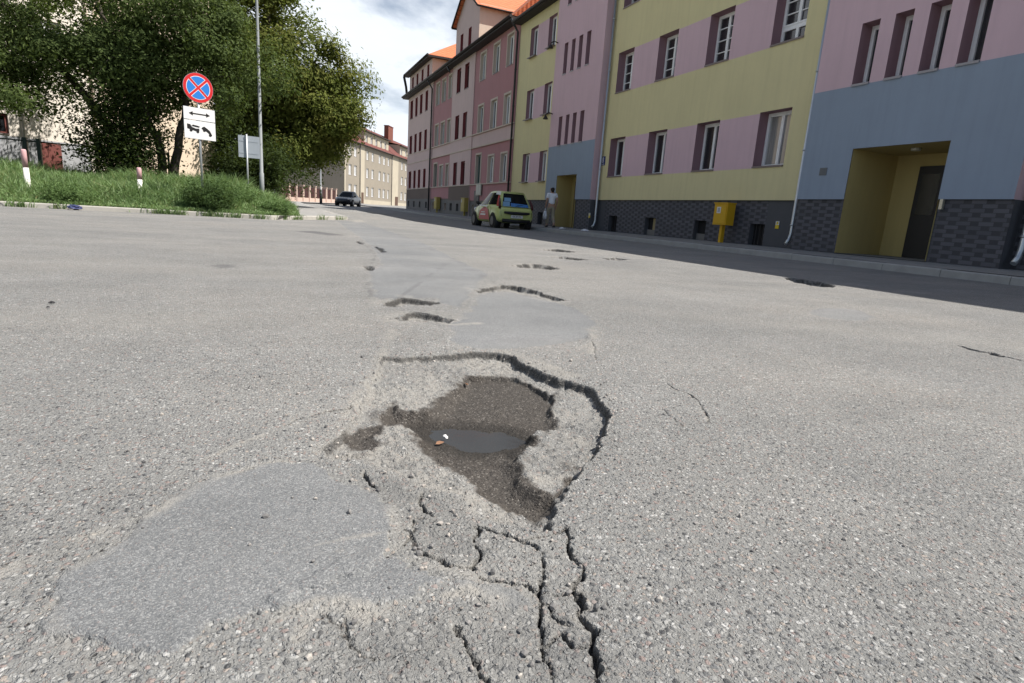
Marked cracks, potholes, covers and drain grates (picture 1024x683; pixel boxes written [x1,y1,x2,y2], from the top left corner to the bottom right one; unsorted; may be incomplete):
crack [401,493,605,683]
pothole [321,351,613,535]
pothole [391,311,456,324]
crack [363,470,376,489]
pothole [382,297,441,307]
crack [957,345,1021,361]
pothole [475,285,569,302]
pothole [784,277,837,288]
